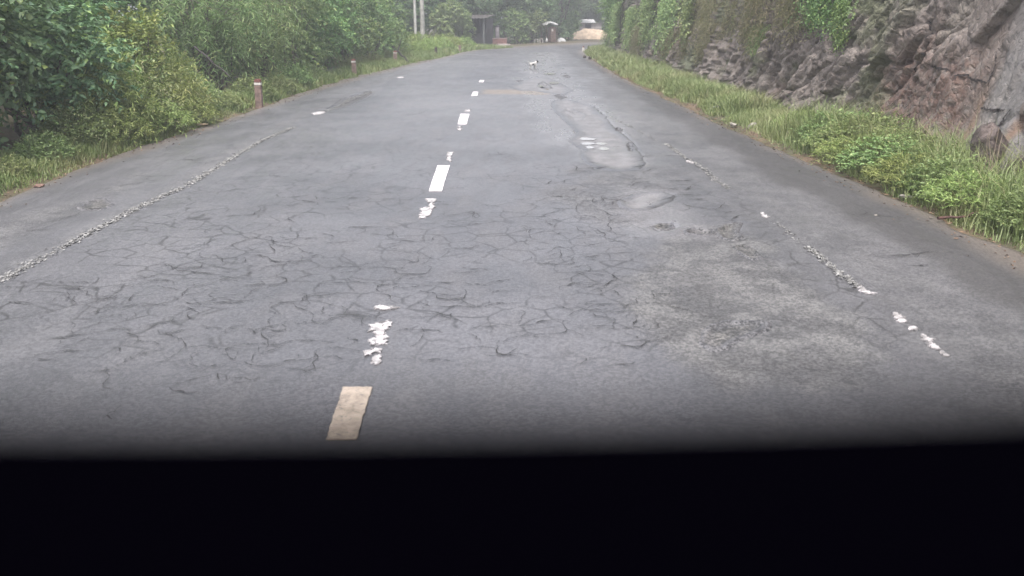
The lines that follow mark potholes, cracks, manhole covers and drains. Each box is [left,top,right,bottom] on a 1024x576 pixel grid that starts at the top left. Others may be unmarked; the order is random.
pothole [617,191,675,211]
pothole [652,223,675,231]
pothole [683,227,717,236]
crack [6,141,746,393]
